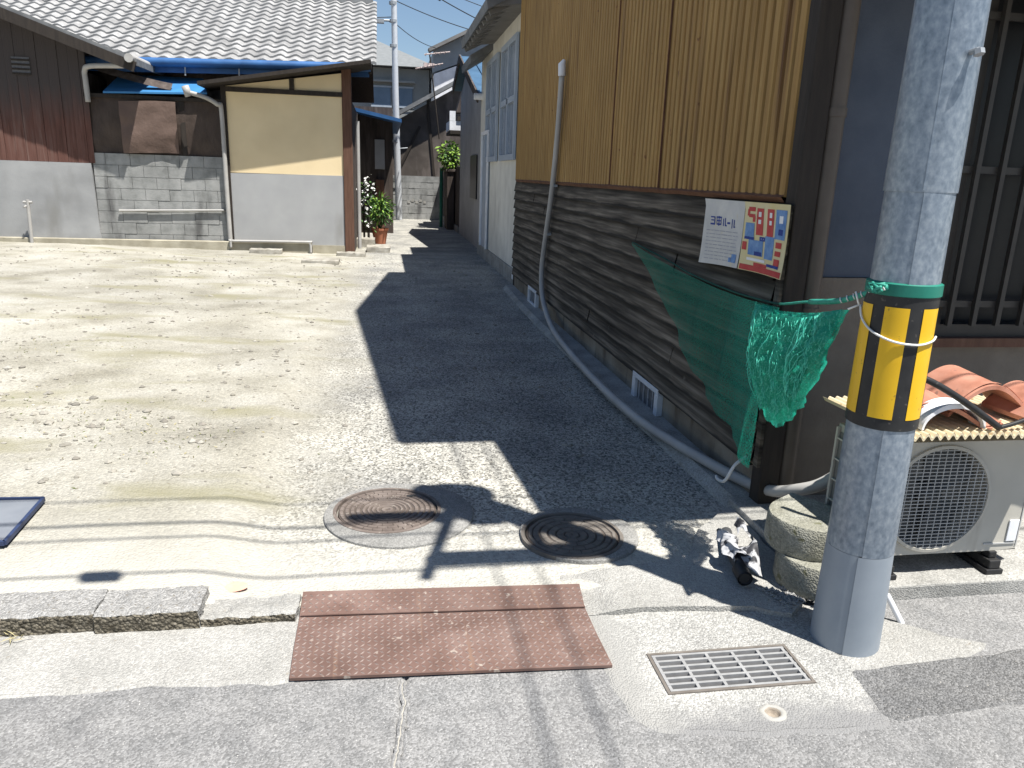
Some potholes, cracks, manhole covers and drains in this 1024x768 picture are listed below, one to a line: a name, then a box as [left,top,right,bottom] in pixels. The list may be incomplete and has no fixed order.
crack [390,679,410,768]
manhole cover [323,483,473,549]
drain grate [646,644,817,695]
manhole cover [520,508,639,565]
